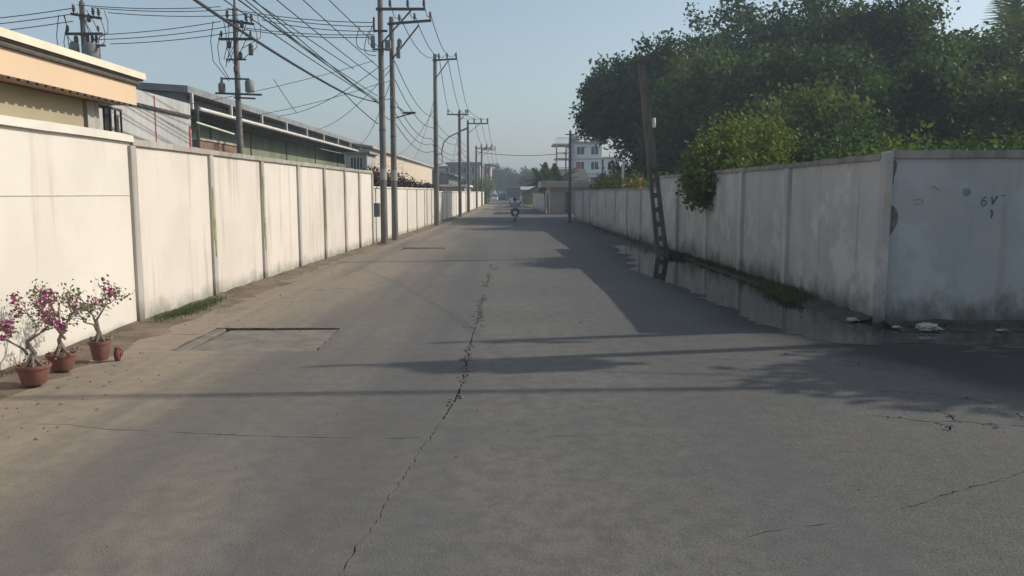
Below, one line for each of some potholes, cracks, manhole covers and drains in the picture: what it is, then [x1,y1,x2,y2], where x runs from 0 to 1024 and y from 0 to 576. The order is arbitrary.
crack [873,391,1024,432]
manhole cover [172,328,340,352]
crack [897,471,1024,511]
crack [62,264,494,576]
